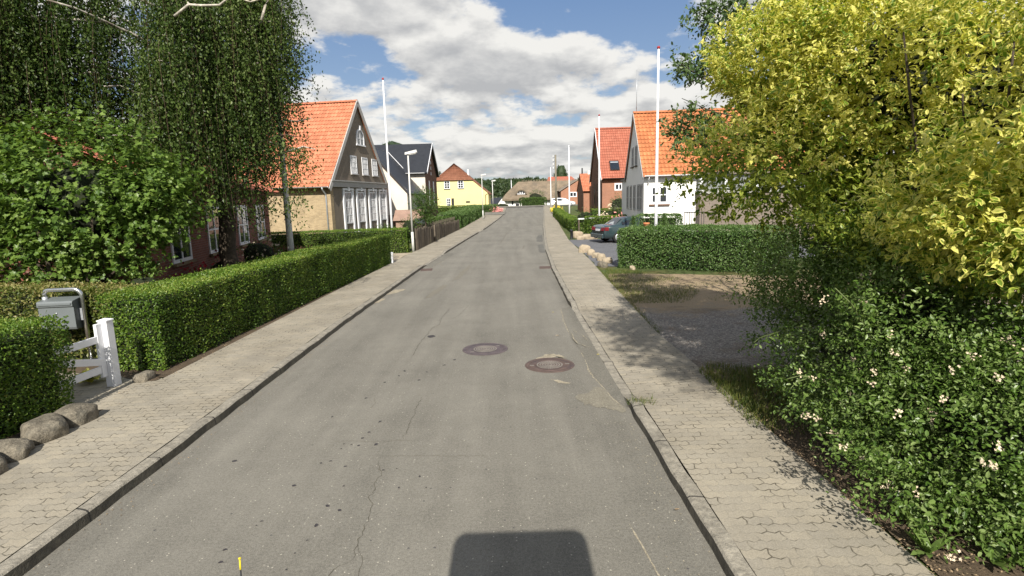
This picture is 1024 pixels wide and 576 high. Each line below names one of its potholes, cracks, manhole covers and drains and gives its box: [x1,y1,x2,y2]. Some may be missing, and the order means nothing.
manhole cover [525,358,575,373]
manhole cover [462,343,508,355]
crack [327,397,491,576]
